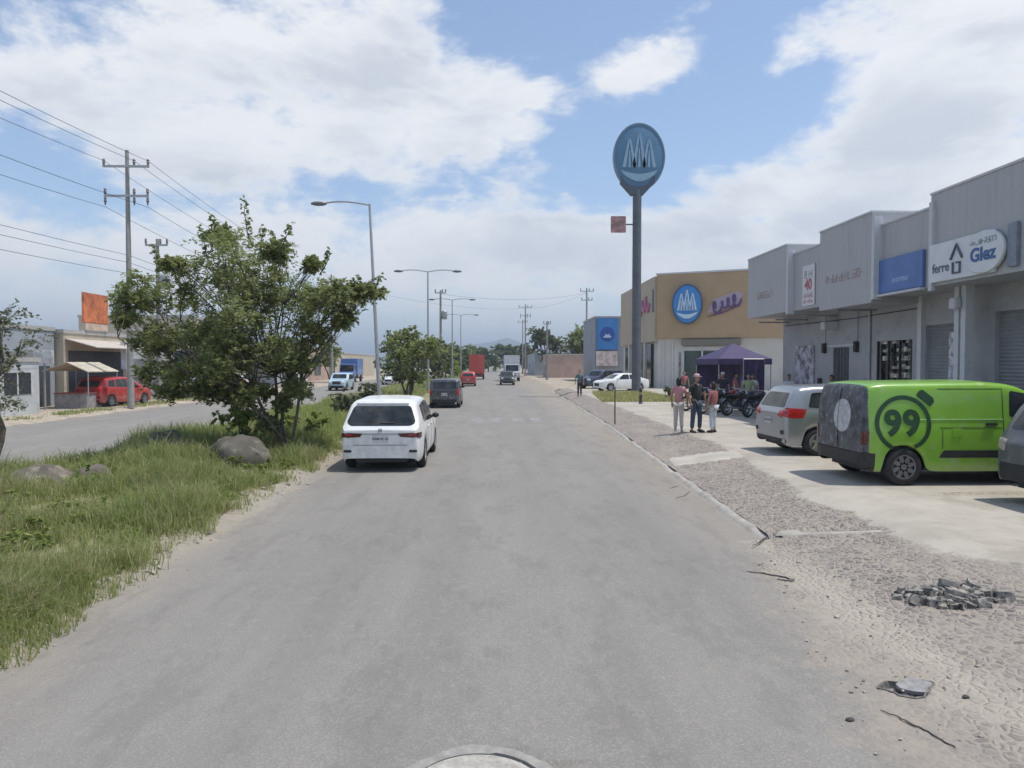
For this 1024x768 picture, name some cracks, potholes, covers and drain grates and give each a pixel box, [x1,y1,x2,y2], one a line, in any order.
crack [880,710,955,747]
crack [746,571,795,581]
manhole cover [407,744,553,768]
